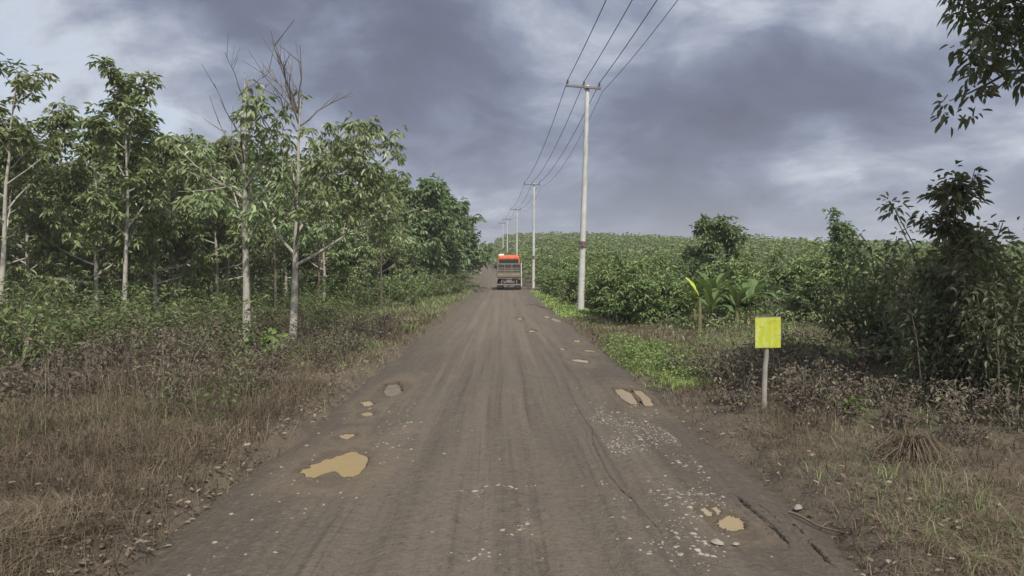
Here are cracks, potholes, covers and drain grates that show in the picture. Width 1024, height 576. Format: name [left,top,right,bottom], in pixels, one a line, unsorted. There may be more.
pothole [705,505,729,520]
pothole [356,400,381,408]
pothole [291,449,375,480]
pothole [694,505,717,519]
pothole [704,511,757,535]
pothole [631,388,656,407]
pothole [612,387,640,406]
pothole [355,410,381,418]
pothole [376,381,407,398]
pothole [333,431,363,441]
crack [725,492,846,572]
